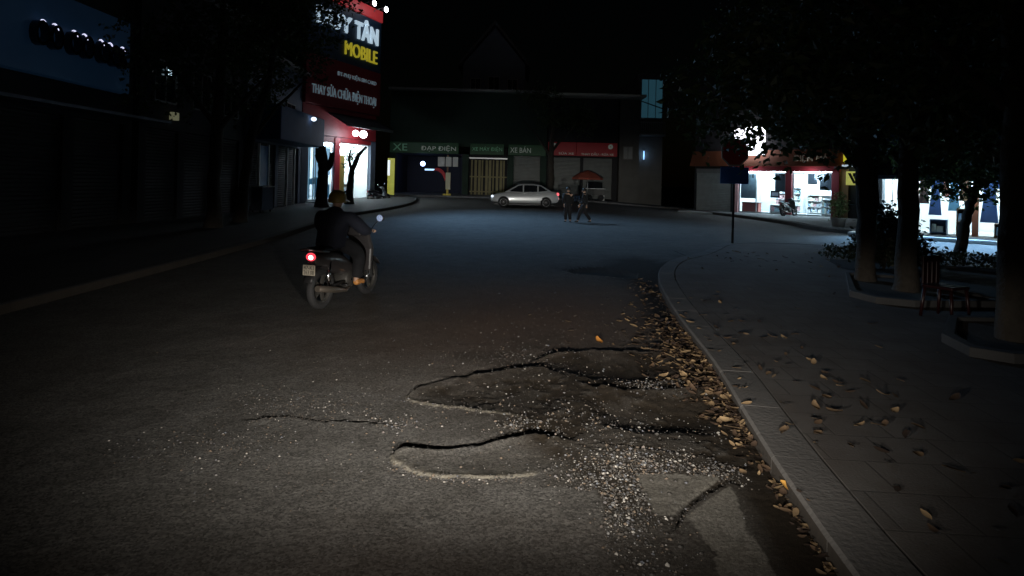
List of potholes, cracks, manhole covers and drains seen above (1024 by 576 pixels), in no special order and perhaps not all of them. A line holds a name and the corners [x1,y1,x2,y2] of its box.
crack [241,414,402,425]
pothole [407,365,578,419]
pothole [391,433,588,480]
pothole [521,348,684,384]
crack [667,475,749,538]
pothole [571,376,728,437]
